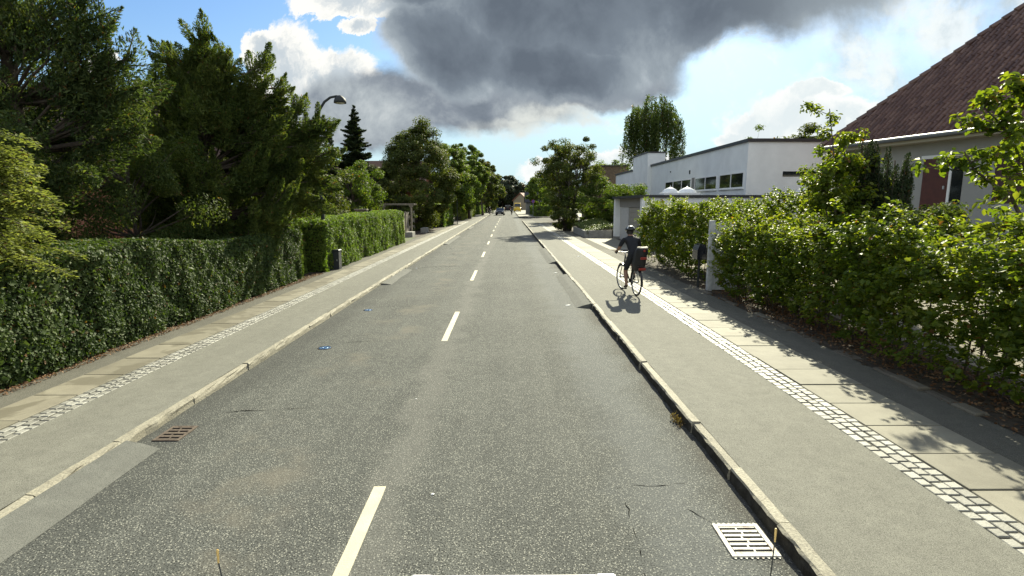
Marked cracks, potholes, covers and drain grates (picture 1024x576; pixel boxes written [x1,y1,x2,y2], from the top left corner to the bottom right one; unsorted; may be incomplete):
drain grate [151,426,198,441]
drain grate [712,523,782,559]
